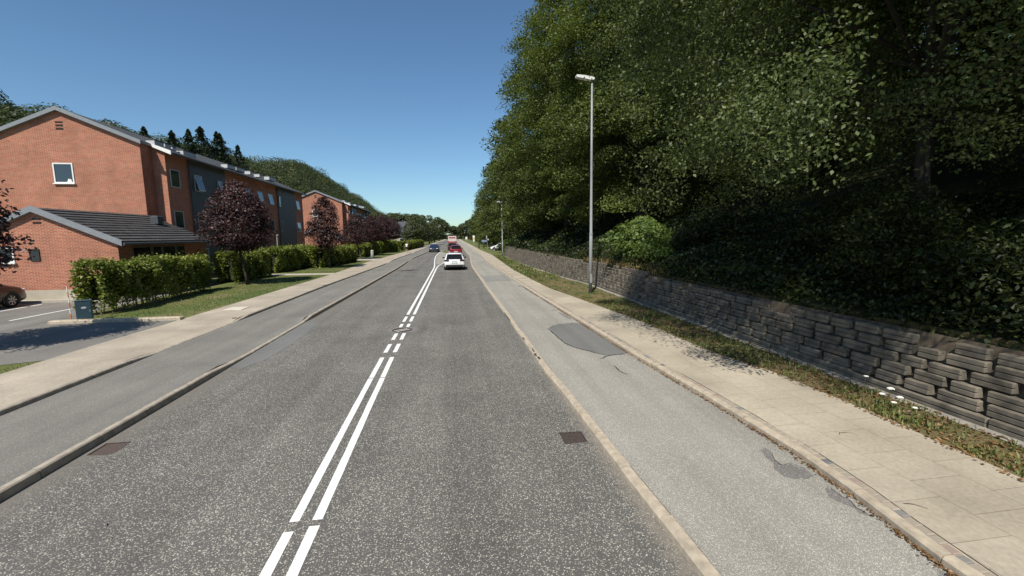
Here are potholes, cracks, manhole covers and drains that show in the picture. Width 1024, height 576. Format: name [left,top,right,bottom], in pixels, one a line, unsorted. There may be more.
crack [522,324,626,374]
manhole cover [86,441,132,456]
manhole cover [559,431,588,444]
